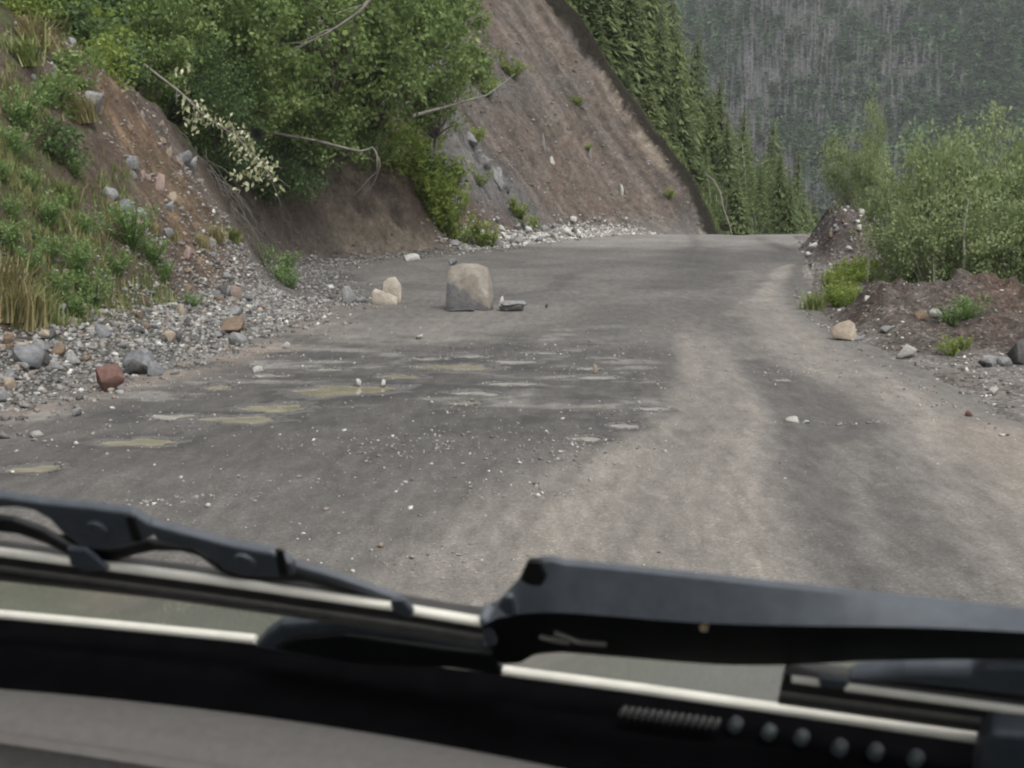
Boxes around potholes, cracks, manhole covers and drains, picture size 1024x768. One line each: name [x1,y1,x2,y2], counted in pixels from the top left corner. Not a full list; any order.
pothole [175,413,301,426]
pothole [397,363,512,372]
pothole [220,400,322,414]
pothole [601,421,647,430]
pothole [0,461,72,475]
pothole [142,412,219,422]
pothole [78,436,192,448]
pothole [560,434,611,442]
pothole [273,383,421,400]
